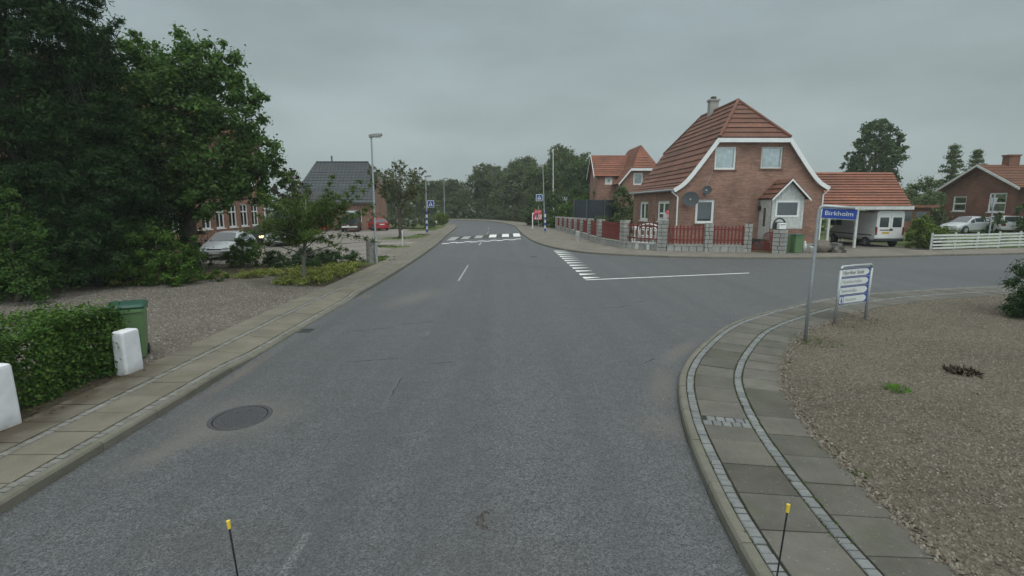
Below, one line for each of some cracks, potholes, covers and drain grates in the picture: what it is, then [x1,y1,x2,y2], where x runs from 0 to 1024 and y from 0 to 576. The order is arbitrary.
manhole cover [207,405,273,431]
pothole [476,511,499,533]
